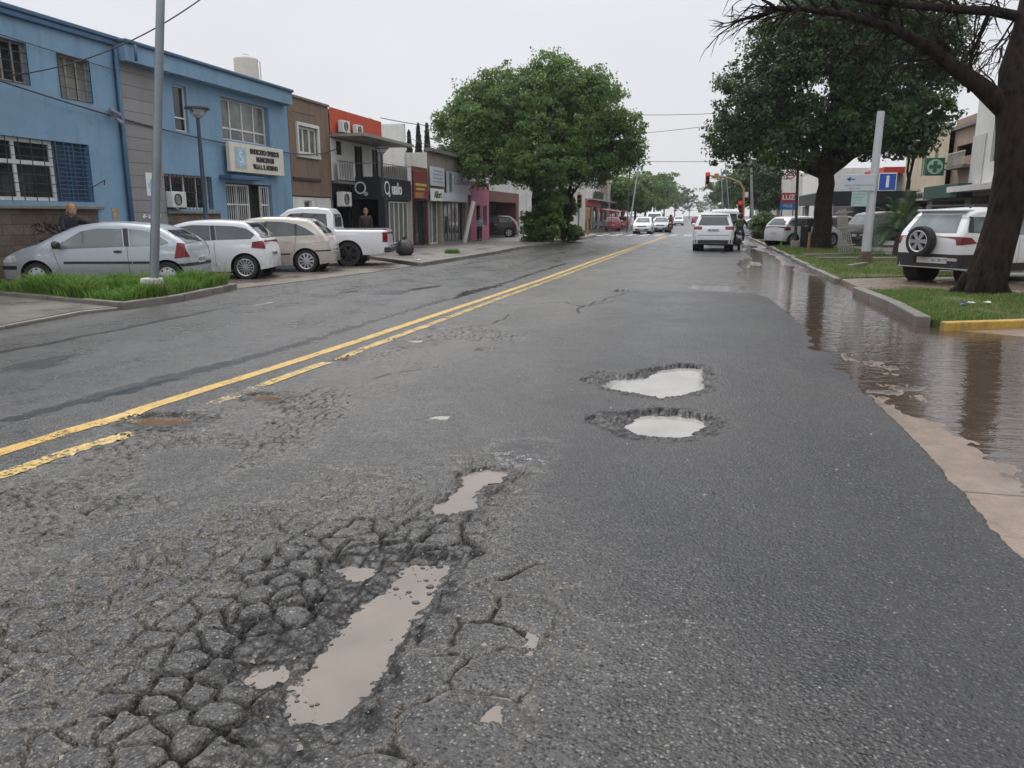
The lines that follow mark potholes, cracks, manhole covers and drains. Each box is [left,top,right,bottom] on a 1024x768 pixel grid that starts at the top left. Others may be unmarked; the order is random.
pothole [205,541,483,768]
pothole [109,410,228,432]
pothole [579,362,719,400]
pothole [465,696,521,739]
pothole [237,390,308,406]
pothole [580,407,728,442]
crack [0,293,718,768]
pothole [403,465,528,524]
